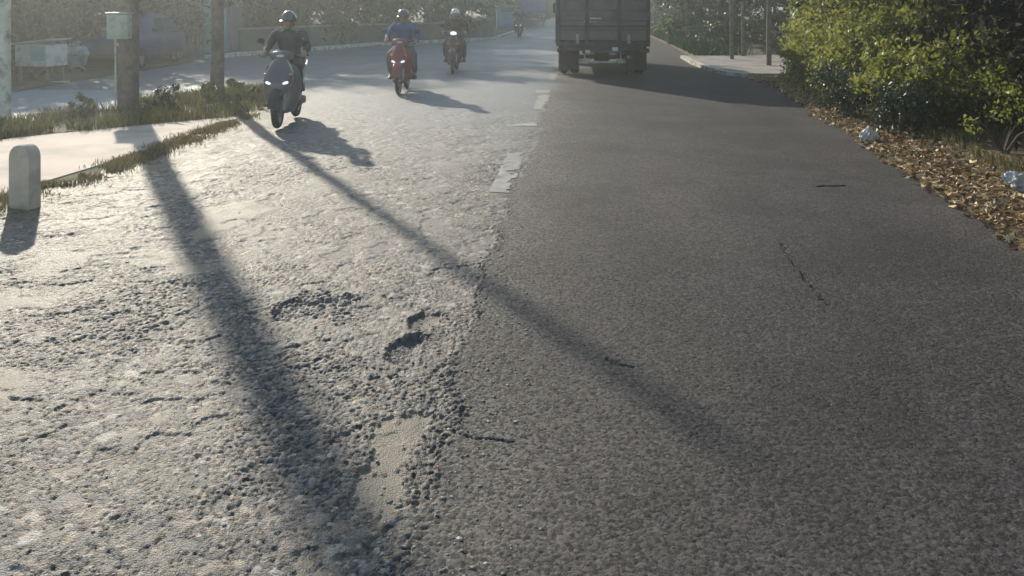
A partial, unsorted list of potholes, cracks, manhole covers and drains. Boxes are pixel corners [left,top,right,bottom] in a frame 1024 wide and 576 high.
crack [459,433,518,444]
pothole [267,288,364,327]
crack [601,356,638,369]
pothole [379,331,433,367]
crack [778,243,833,306]
pothole [404,310,449,331]
